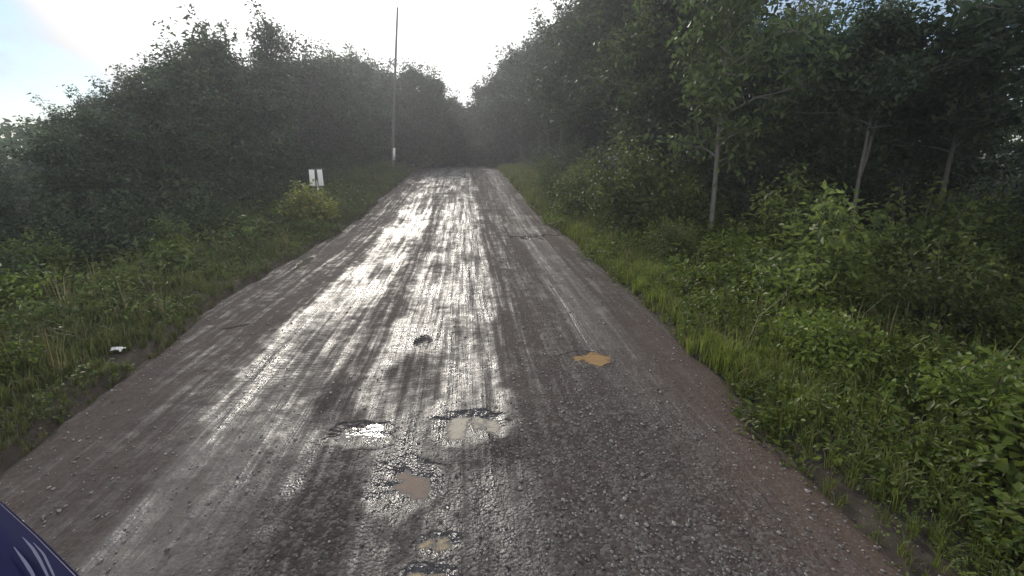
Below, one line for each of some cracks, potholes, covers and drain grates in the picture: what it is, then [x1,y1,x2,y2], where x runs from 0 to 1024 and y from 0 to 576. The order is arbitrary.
pothole [388,558,471,576]
pothole [555,349,617,368]
pothole [315,418,402,452]
pothole [349,450,451,533]
pothole [422,406,519,452]
pothole [401,527,475,562]
pothole [411,333,436,350]
